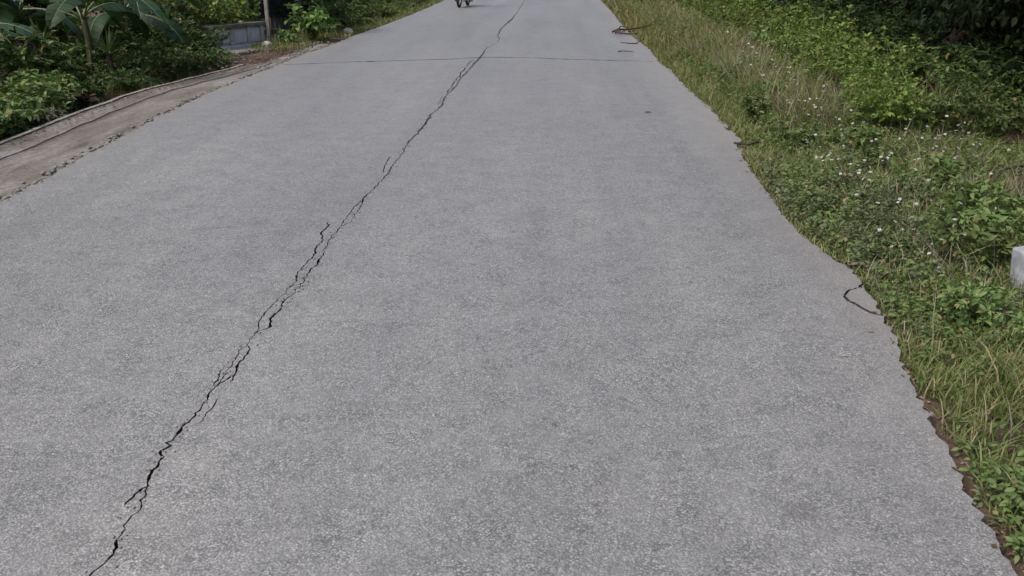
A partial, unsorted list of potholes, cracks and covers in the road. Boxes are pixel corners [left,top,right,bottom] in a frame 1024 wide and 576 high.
crack [89,0,653,576]
crack [843,282,887,320]
